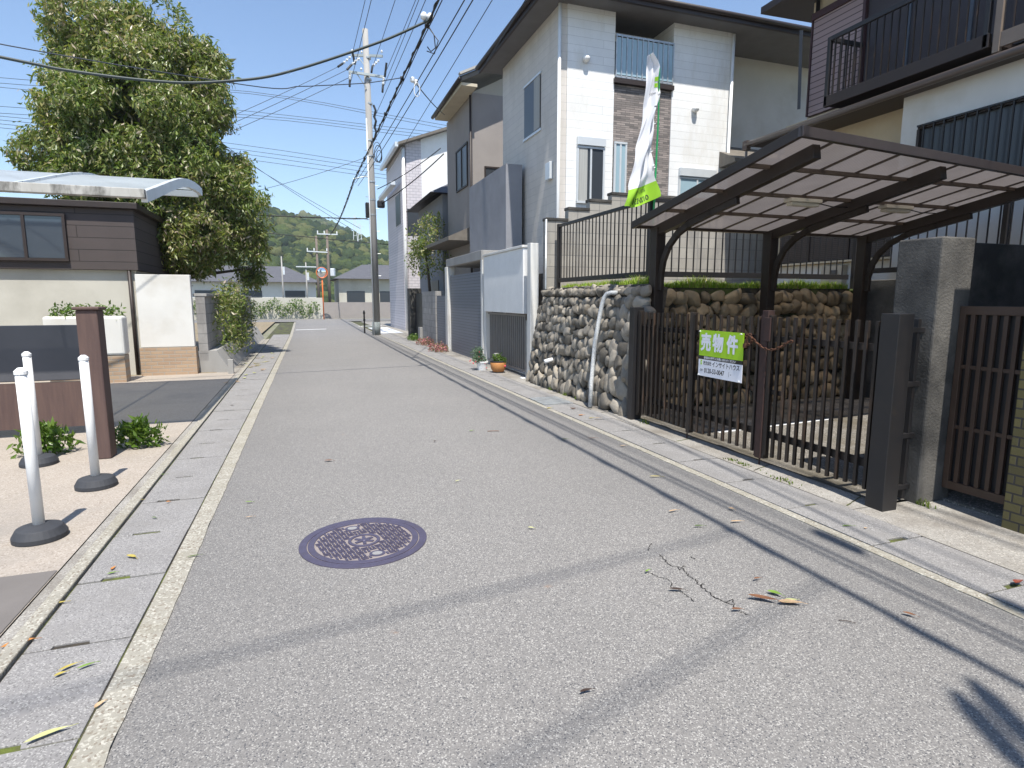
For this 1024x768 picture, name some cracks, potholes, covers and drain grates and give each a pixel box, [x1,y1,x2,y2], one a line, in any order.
manhole cover [298,517,427,569]
crack [646,543,749,615]
